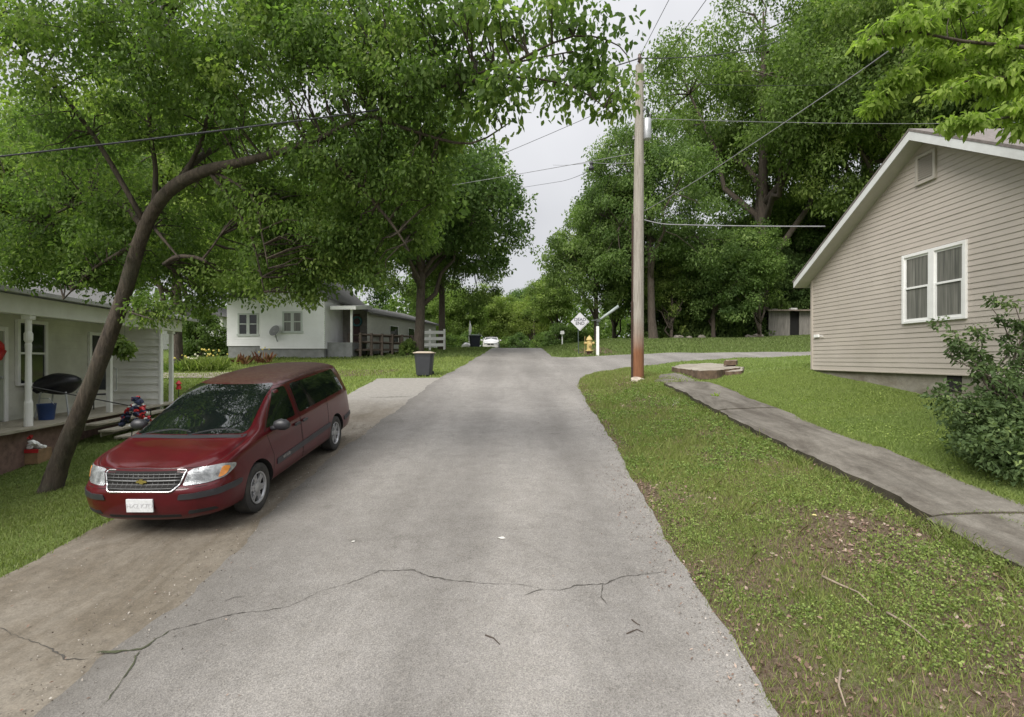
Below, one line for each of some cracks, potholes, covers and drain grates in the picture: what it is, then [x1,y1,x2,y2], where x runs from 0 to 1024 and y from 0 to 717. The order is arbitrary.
crack [172,569,659,630]
crack [96,631,168,705]
crack [2,628,79,660]
